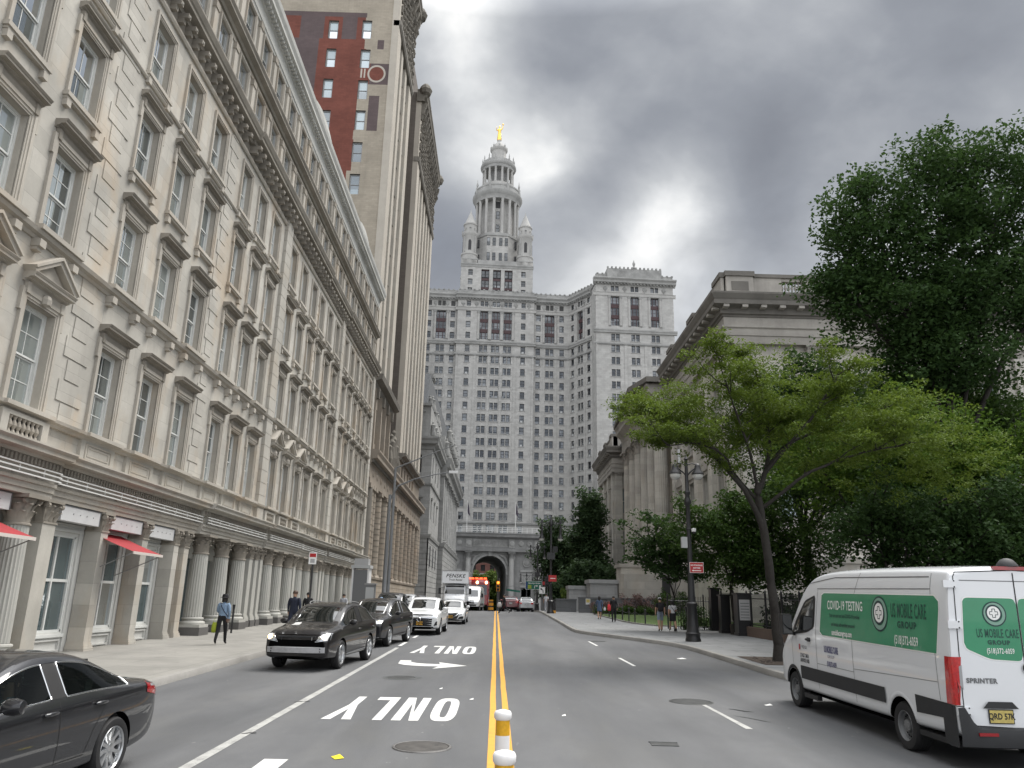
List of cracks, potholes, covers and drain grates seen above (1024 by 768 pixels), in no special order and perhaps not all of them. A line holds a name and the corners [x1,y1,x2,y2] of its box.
manhole cover [392,741,452,753]
